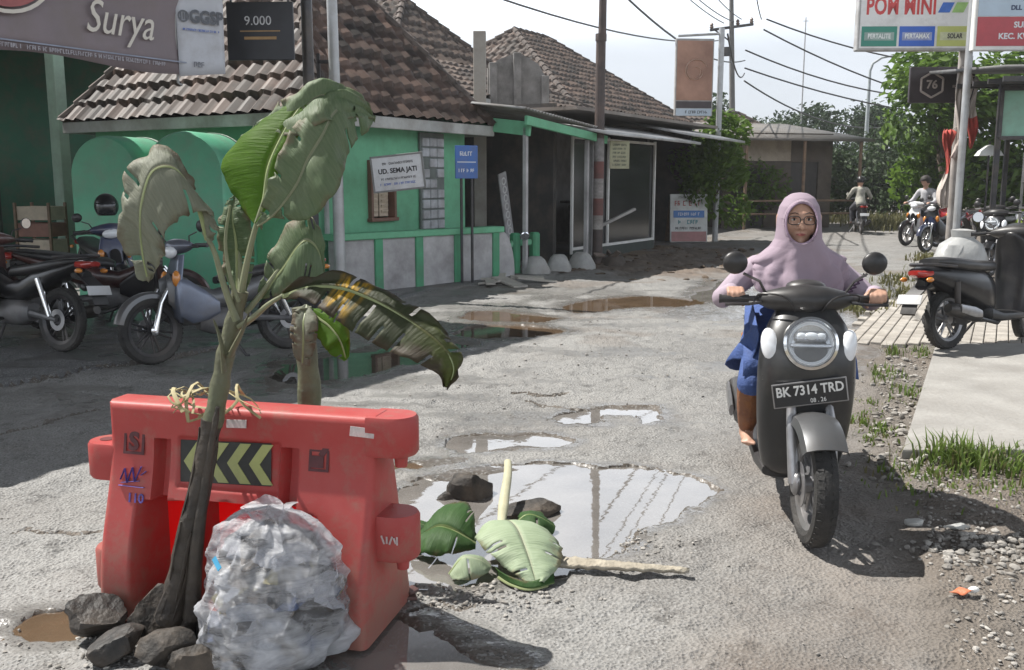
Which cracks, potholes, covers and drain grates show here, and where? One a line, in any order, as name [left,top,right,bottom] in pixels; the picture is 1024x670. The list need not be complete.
pothole [551,404,665,424]
pothole [457,309,563,323]
pothole [0,608,84,643]
pothole [444,432,576,453]
pothole [561,295,709,313]
crack [10,527,103,536]
pothole [397,461,724,591]
pothole [451,324,566,340]
